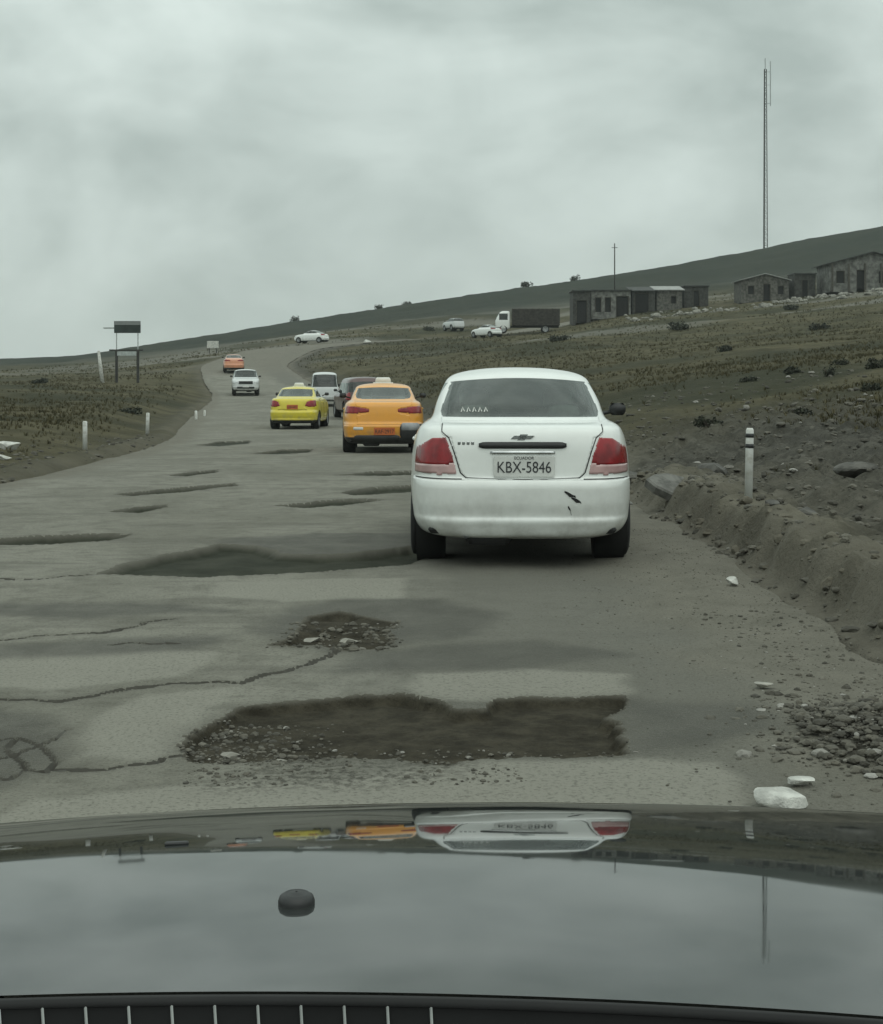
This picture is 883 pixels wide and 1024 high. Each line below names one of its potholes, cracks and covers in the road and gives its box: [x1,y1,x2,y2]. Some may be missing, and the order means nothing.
pothole [97,543,424,578]
pothole [114,483,239,496]
crack [0,618,181,646]
pothole [275,498,384,508]
crack [0,648,341,703]
pothole [175,692,631,765]
pothole [340,485,411,495]
pothole [108,504,168,513]
crack [0,730,184,781]
pothole [0,533,133,545]
pothole [267,610,400,651]
